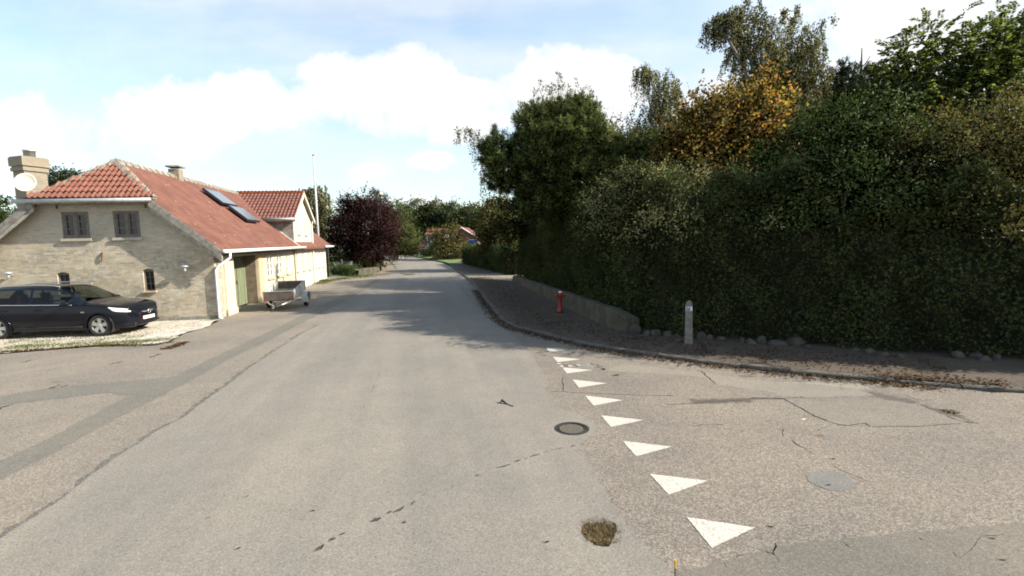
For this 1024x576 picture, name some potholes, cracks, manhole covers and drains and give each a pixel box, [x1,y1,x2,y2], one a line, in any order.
manhole cover [554,422,589,435]
crack [552,377,969,427]
